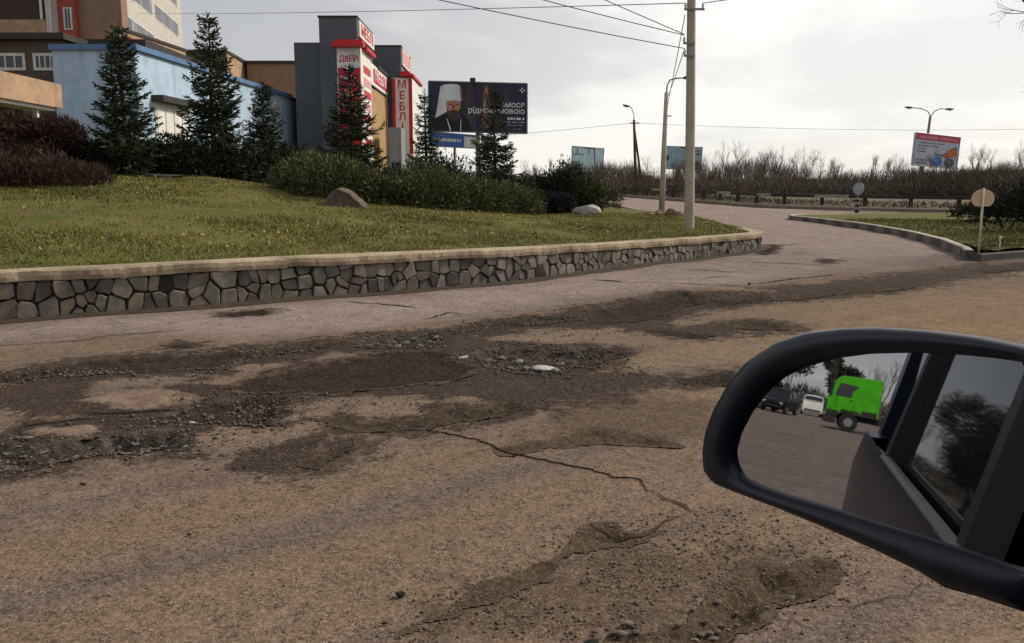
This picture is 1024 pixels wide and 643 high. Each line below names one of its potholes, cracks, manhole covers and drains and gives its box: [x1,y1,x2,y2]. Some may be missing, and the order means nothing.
pothole [0,427,197,471]
pothole [458,345,631,376]
crack [427,405,708,541]
